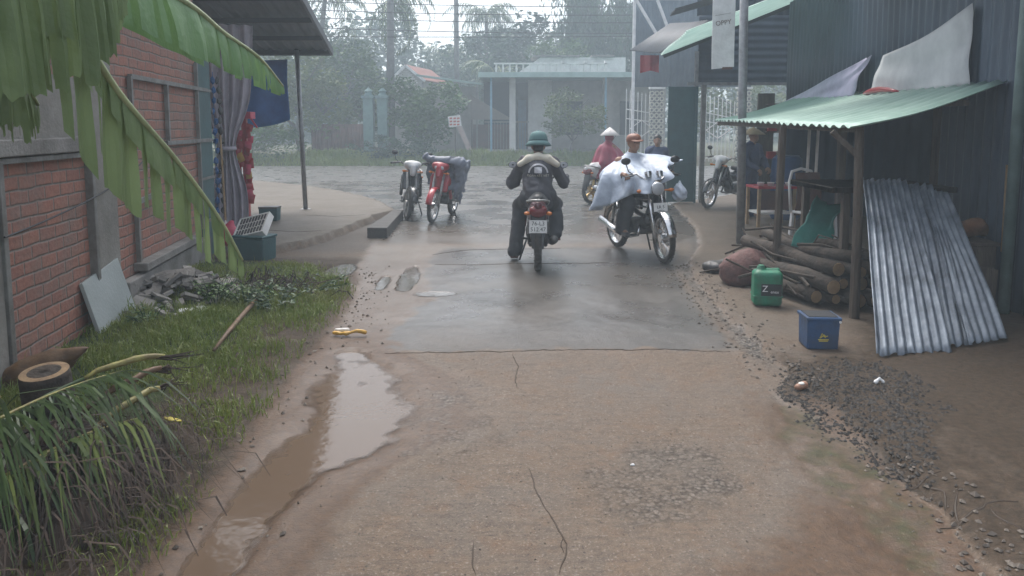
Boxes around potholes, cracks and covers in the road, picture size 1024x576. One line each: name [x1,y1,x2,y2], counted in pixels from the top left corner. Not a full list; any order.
pothole [394,265,421,292]
crack [529,469,567,569]
pothole [375,276,390,290]
